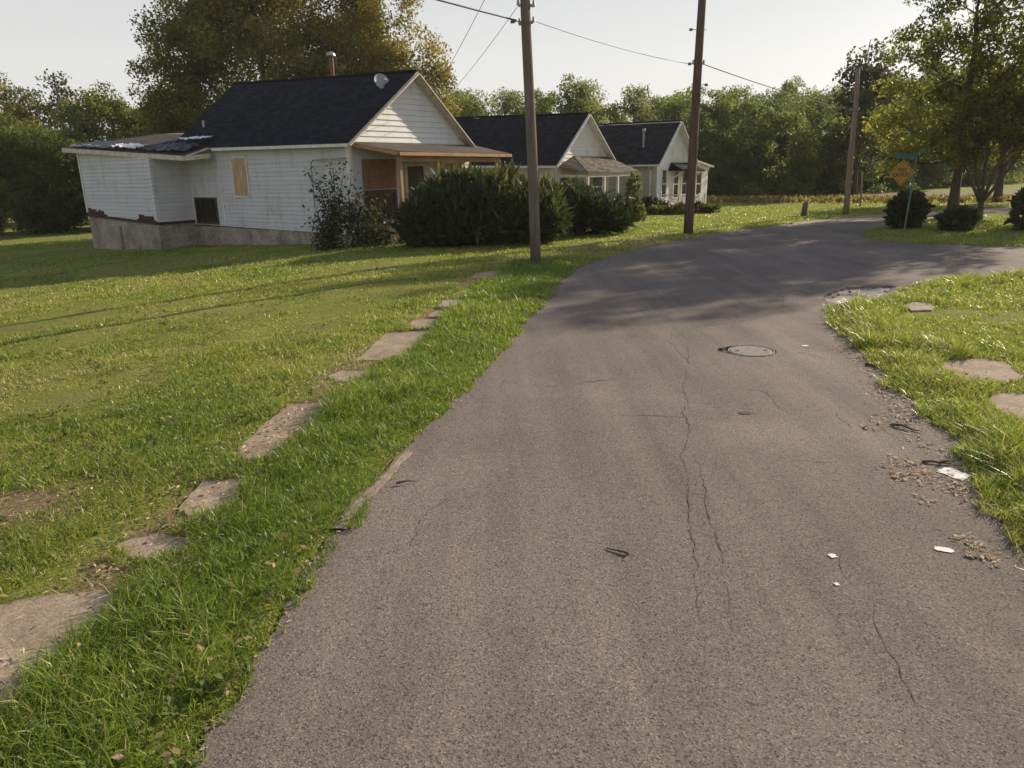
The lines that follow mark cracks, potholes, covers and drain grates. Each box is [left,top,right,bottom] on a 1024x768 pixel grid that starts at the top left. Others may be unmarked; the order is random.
manhole cover [728,345,775,357]
crack [839,543,935,743]
crack [613,337,732,708]
pothole [823,285,895,303]
